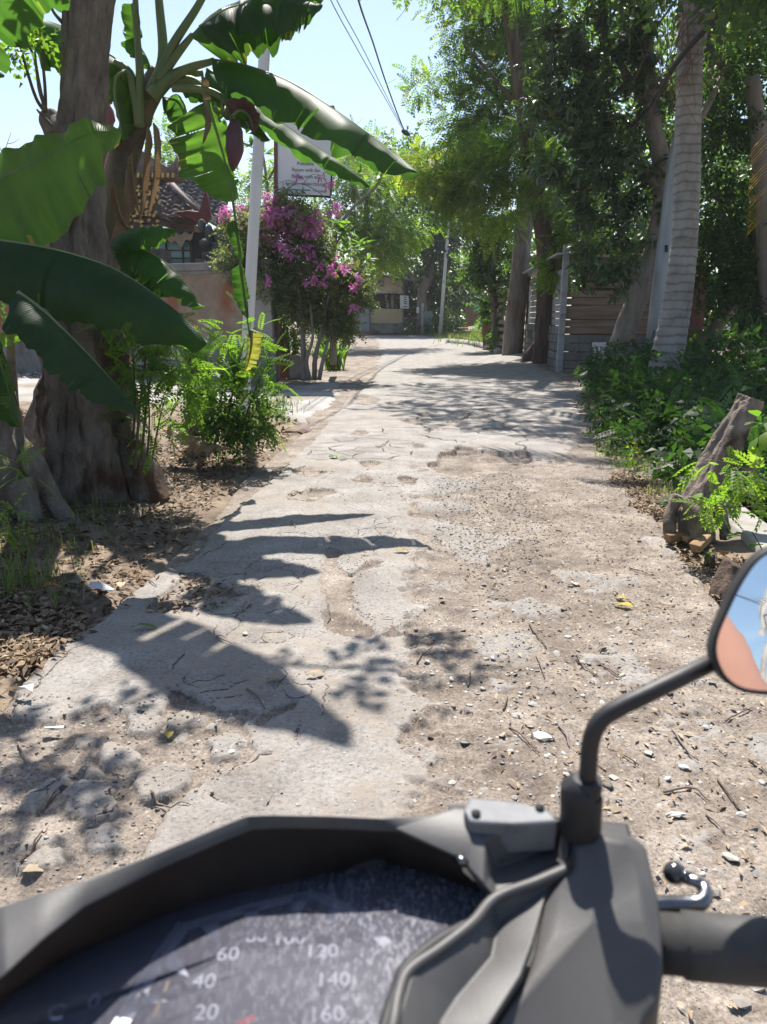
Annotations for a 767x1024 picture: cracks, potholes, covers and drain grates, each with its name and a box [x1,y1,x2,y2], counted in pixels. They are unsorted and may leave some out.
crack [162,653,247,699]
crack [271,411,544,557]
pothole [407,501,420,517]
pothole [284,487,340,503]
crack [277,665,329,714]
pothole [422,445,536,478]
pothole [349,428,370,436]
crack [204,543,316,643]
pothole [395,475,421,485]
